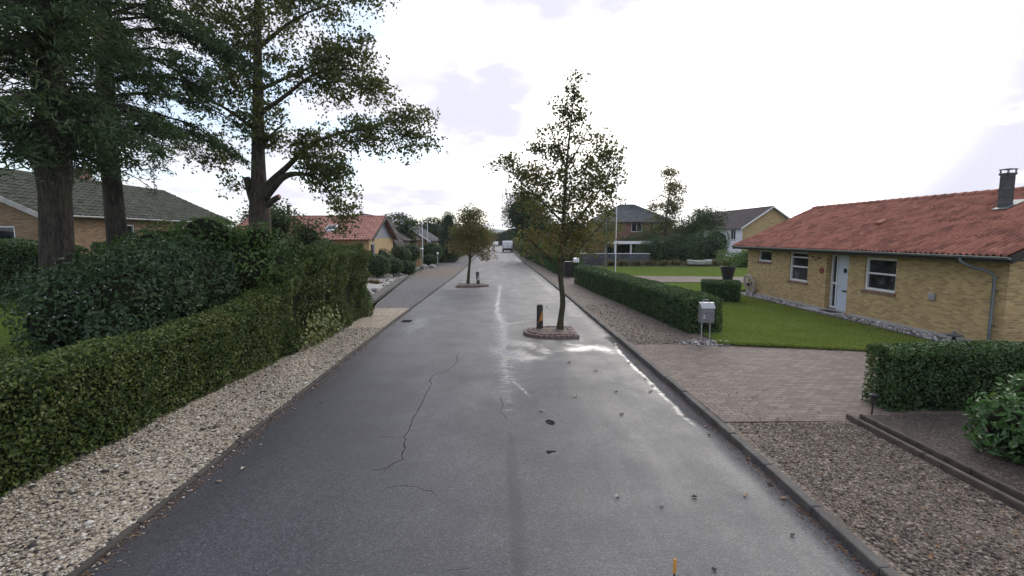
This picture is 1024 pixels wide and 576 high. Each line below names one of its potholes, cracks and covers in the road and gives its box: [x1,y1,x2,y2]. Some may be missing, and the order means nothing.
crack [379,352,460,496]
